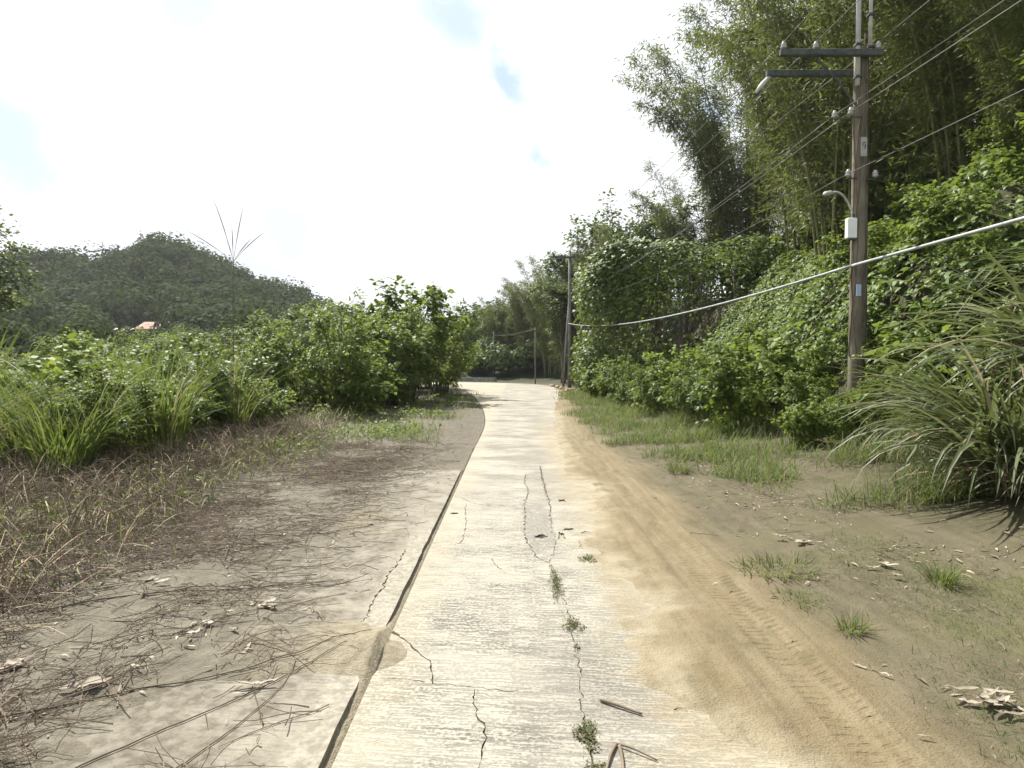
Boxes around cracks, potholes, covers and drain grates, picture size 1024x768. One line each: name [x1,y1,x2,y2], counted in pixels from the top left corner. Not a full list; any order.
crack [391,631,509,760]
crack [523,466,595,768]
crack [363,551,406,621]
